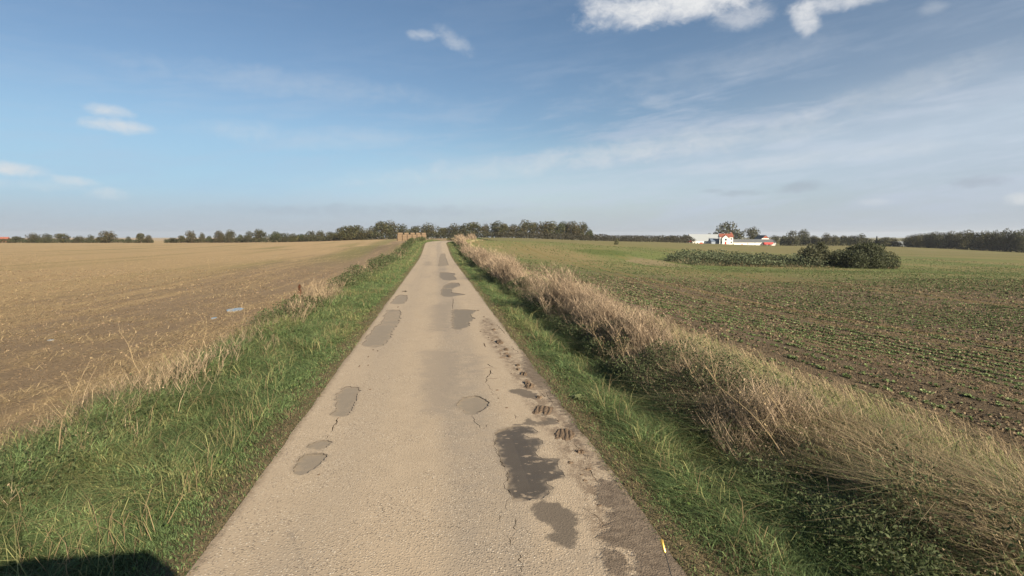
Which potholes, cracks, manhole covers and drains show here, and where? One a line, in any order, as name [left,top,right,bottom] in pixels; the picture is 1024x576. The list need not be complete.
crack [474,411,523,573]
